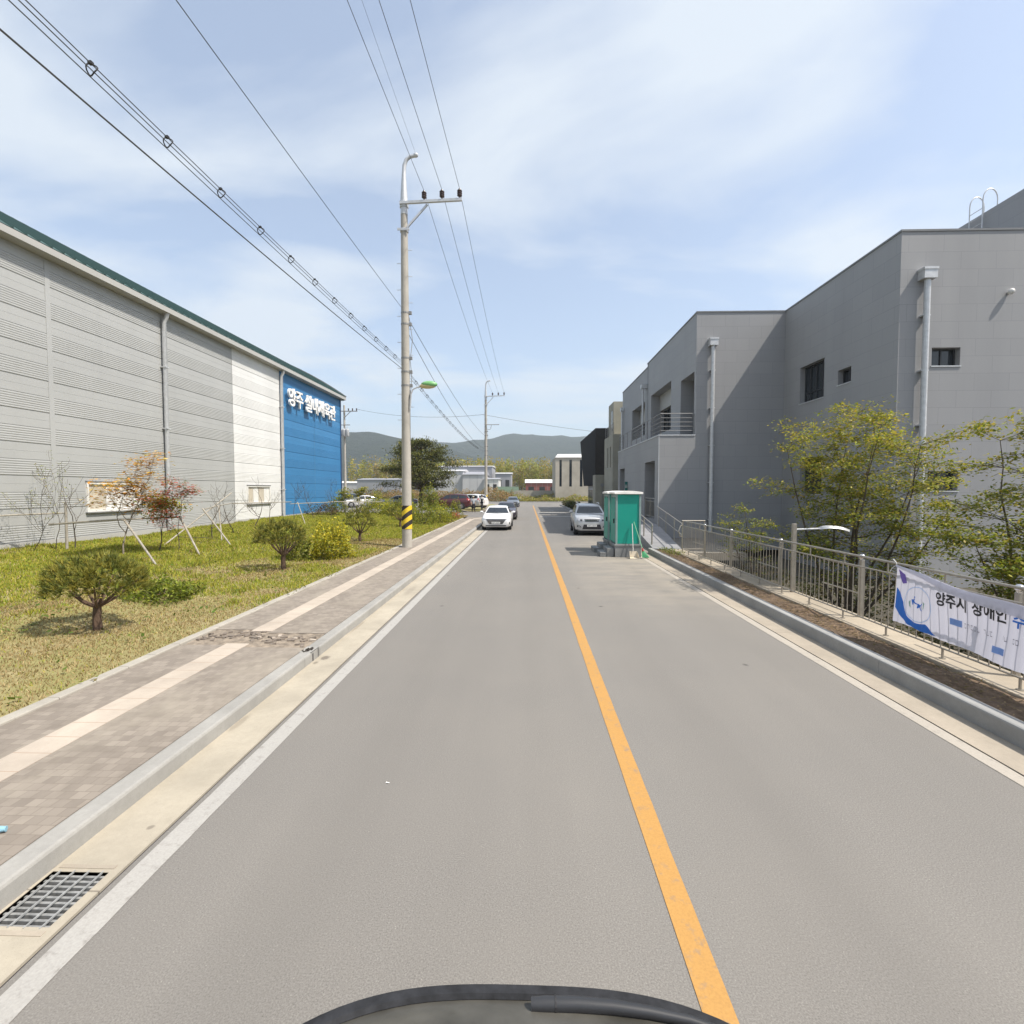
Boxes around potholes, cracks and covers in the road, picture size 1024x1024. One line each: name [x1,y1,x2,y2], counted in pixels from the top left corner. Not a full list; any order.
drain grate [0,864,118,937]
